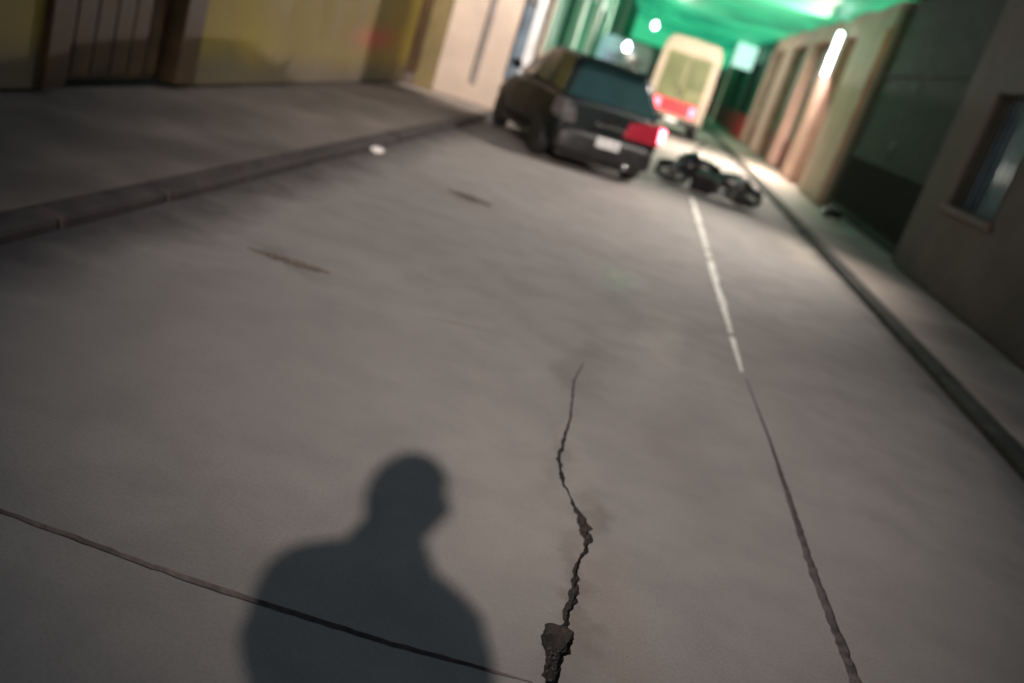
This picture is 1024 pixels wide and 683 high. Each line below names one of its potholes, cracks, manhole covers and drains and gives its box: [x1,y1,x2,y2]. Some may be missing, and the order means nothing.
crack [446,189,491,207]
crack [556,363,593,635]
crack [247,247,331,274]
